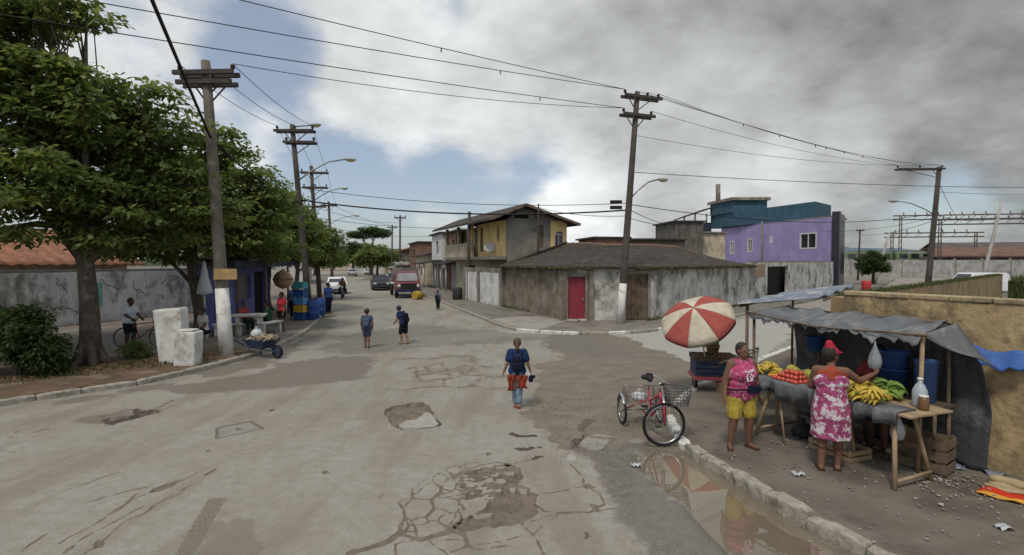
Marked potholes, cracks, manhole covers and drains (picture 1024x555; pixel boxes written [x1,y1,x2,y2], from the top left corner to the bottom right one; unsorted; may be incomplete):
crack [21,468,217,555]
manhole cover [215,421,265,439]
crack [402,356,507,391]
pothole [384,402,434,428]
crack [346,459,628,555]
